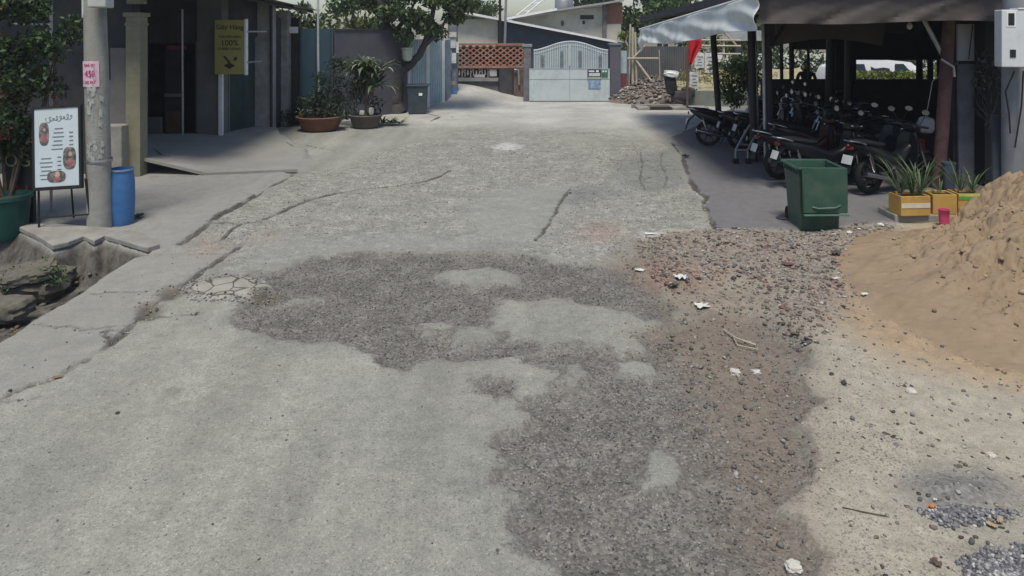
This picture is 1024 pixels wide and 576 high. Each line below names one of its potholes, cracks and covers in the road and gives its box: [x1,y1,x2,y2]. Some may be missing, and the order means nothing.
crack [176,169,452,246]
crack [534,192,569,241]
crack [639,143,718,233]
